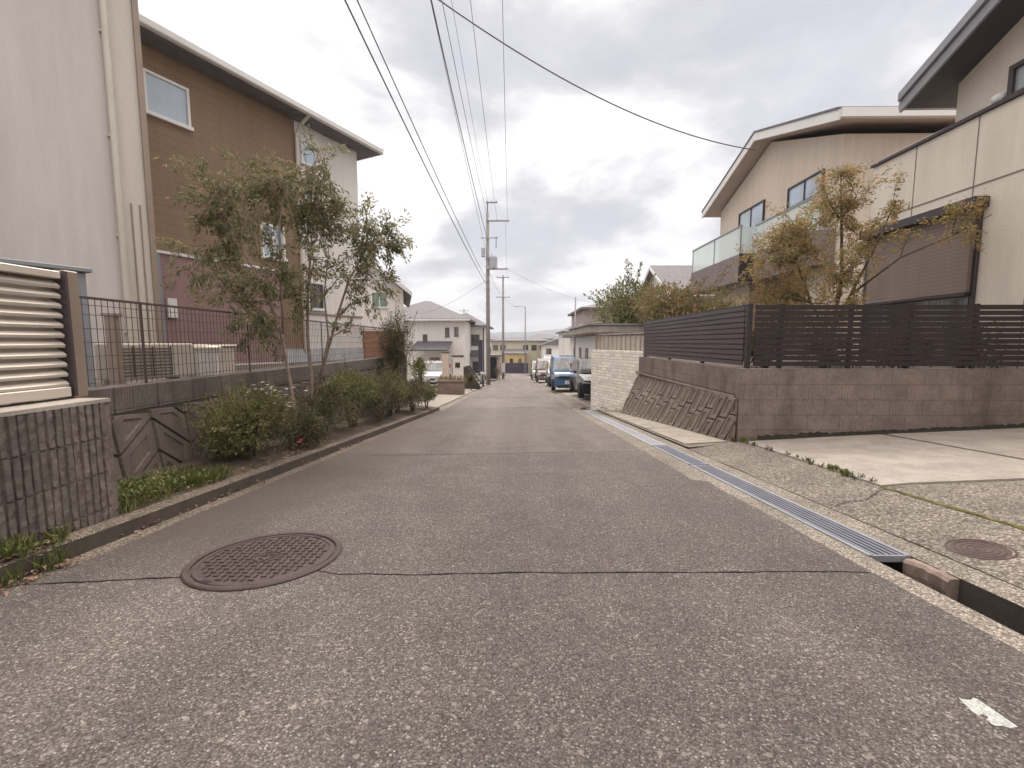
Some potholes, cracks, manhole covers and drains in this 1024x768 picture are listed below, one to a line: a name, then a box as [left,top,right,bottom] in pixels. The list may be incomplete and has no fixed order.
manhole cover [944,539,1019,560]
crack [29,570,869,585]
manhole cover [180,531,342,592]
drain grate [690,465,911,562]
drain grate [653,446,709,465]
